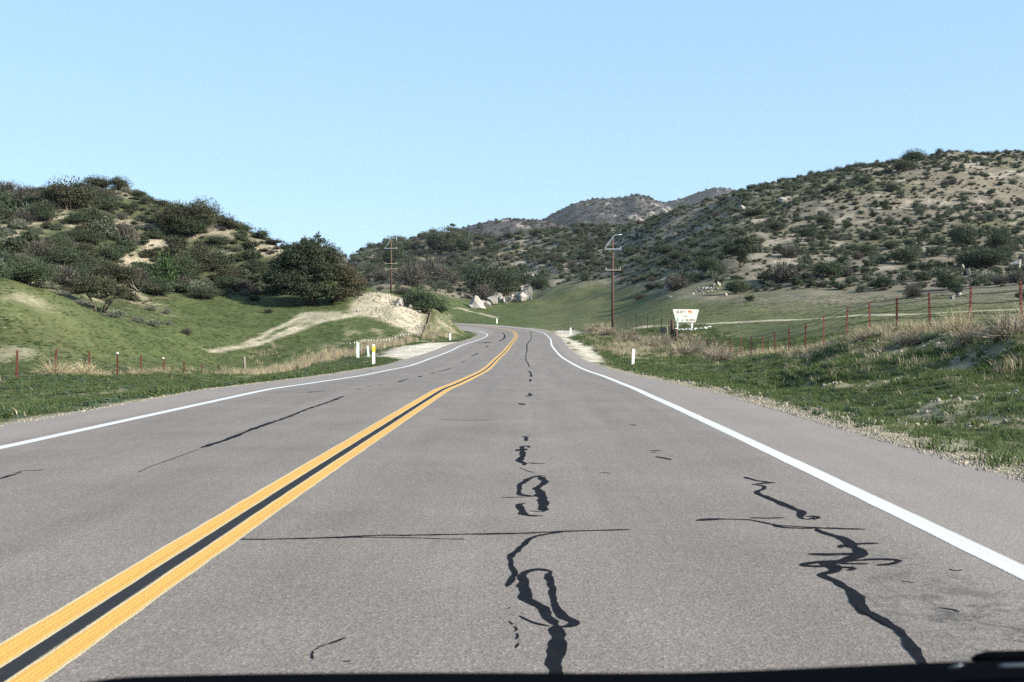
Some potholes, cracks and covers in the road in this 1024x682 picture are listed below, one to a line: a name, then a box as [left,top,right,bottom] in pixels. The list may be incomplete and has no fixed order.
crack [311,637,346,659]
